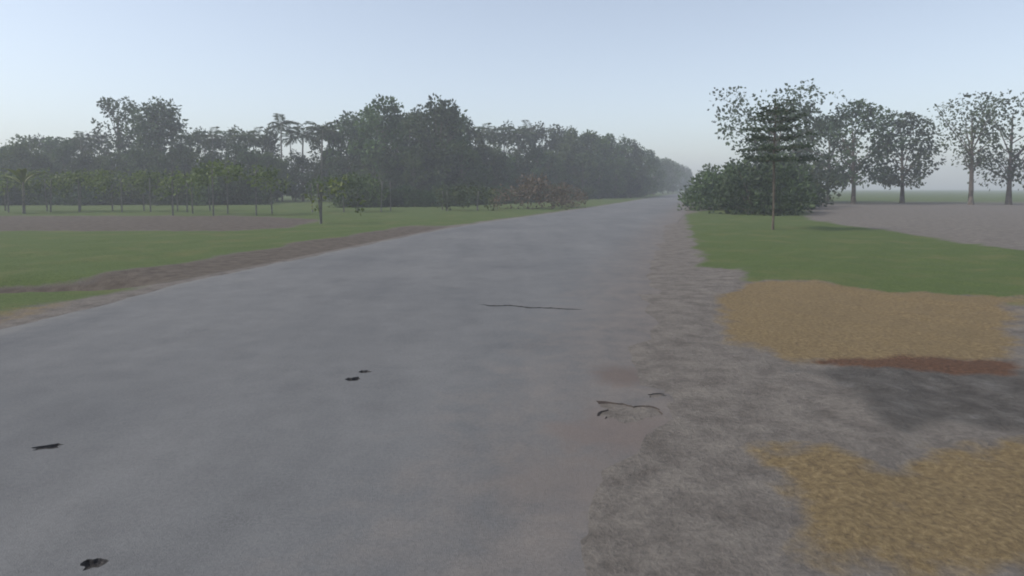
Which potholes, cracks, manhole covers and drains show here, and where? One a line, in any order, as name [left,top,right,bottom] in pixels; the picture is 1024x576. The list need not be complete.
pothole [80,558,109,571]
pothole [597,401,663,419]
pothole [32,443,64,451]
